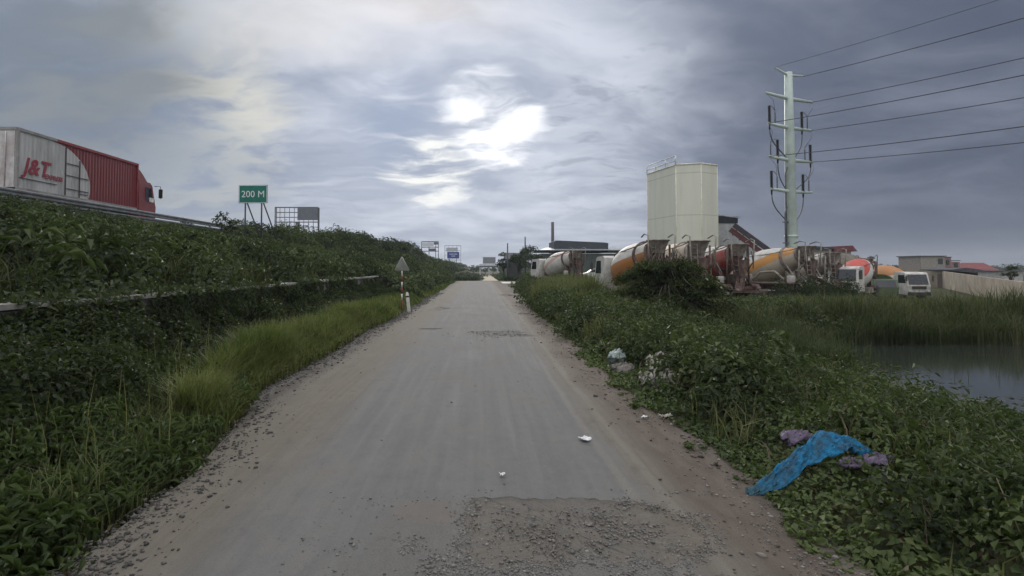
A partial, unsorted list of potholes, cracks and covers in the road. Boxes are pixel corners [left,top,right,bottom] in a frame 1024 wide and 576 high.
pothole [457,496,712,570]
